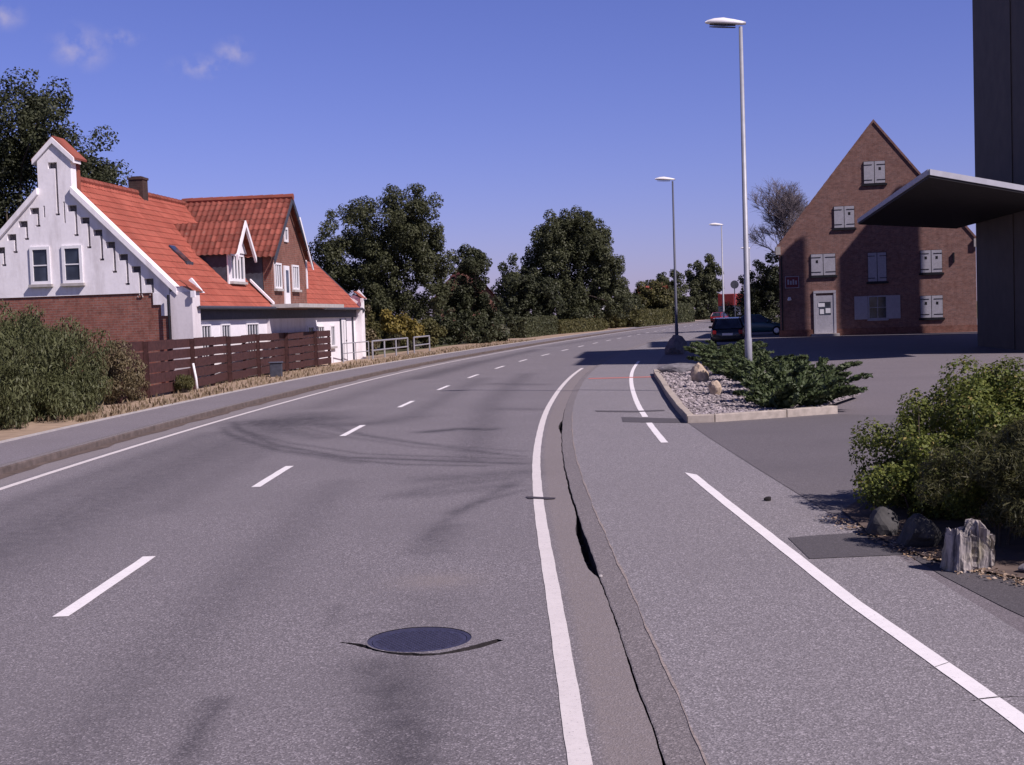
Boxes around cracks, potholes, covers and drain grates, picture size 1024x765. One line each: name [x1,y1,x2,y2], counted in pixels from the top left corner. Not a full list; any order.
crack [559,410,666,765]
manhole cover [367,627,472,652]
